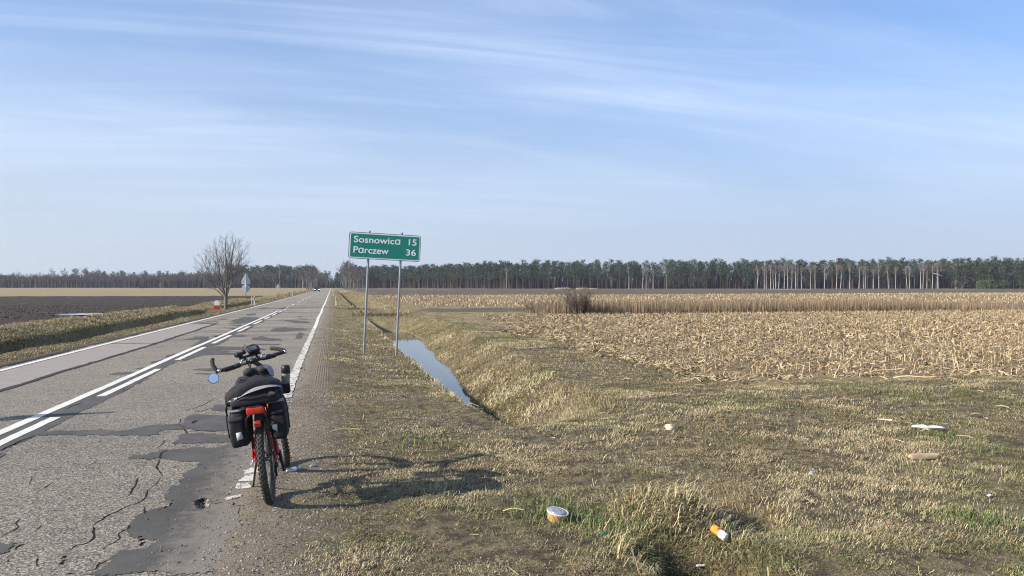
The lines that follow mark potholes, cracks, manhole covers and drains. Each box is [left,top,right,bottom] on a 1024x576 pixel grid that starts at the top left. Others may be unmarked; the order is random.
crack [1,509,71,566]
crack [65,441,175,571]
pothole [194,498,212,509]
